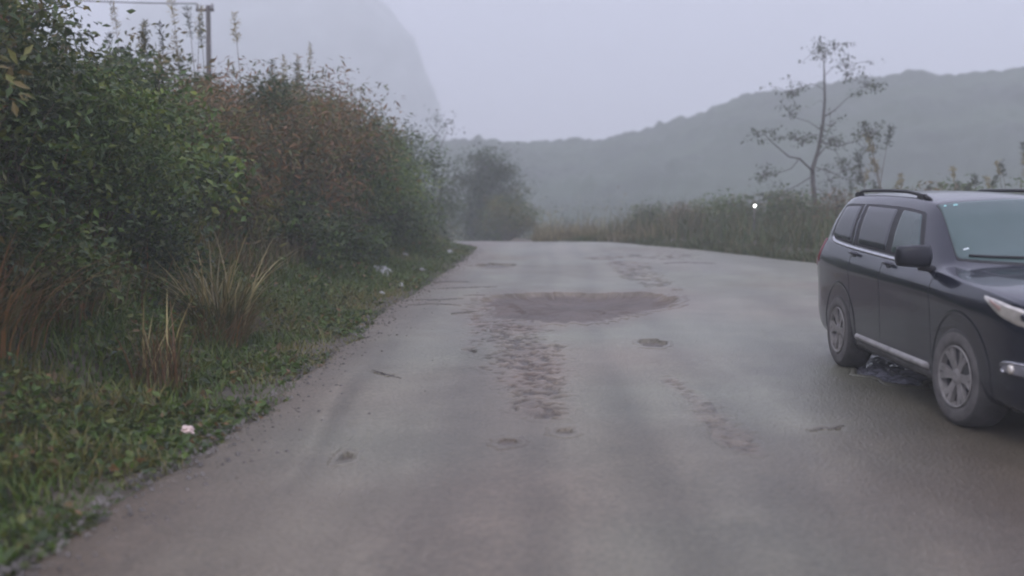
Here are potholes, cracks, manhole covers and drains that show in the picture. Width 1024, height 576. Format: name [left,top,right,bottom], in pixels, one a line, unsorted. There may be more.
crack [576,253,717,291]
pothole [632,337,674,349]
pothole [326,447,365,467]
crack [372,369,401,379]
pothole [543,425,585,439]
pothole [461,291,690,328]
crack [411,281,584,423]
pothole [486,435,530,451]
pothole [833,354,933,390]
